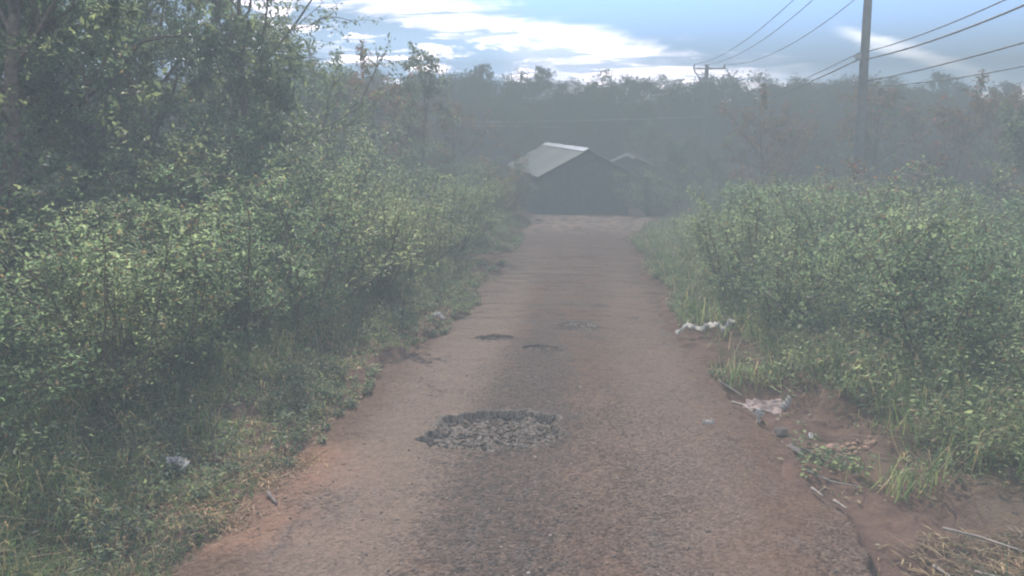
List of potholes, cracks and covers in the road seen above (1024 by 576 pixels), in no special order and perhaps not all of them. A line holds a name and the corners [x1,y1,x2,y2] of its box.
pothole [517,343,564,353]
pothole [553,321,605,332]
pothole [470,333,518,343]
pothole [407,408,572,456]
